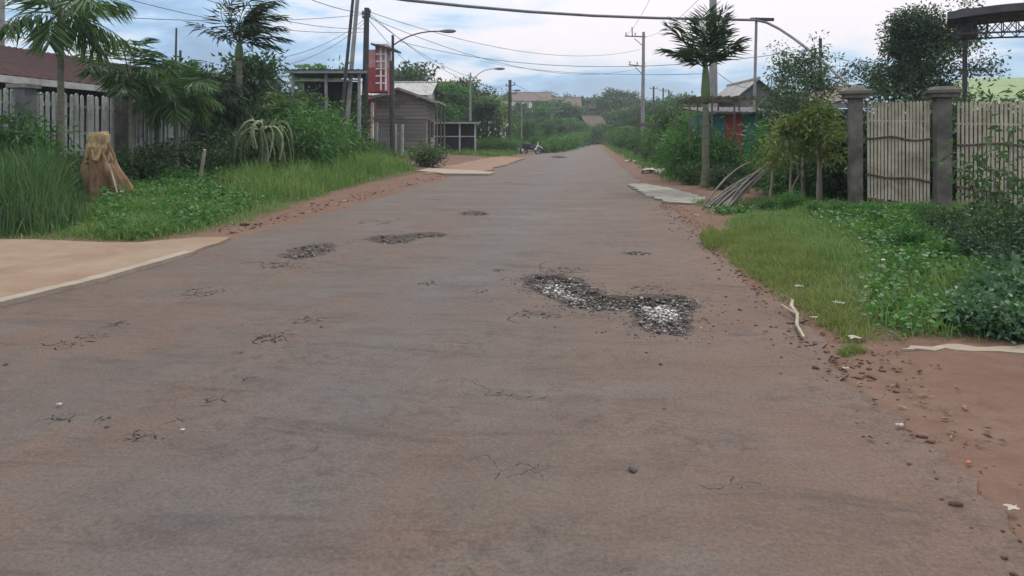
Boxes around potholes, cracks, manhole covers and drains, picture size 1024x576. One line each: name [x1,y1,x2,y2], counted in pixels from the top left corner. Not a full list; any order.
crack [465,378,548,401]
crack [507,309,560,323]
pothole [502,270,740,344]
crack [172,287,225,297]
crack [474,455,543,479]
crack [252,316,327,344]
crack [36,374,255,442]
pothole [359,231,449,244]
crack [41,321,130,350]
pothole [278,242,348,260]
